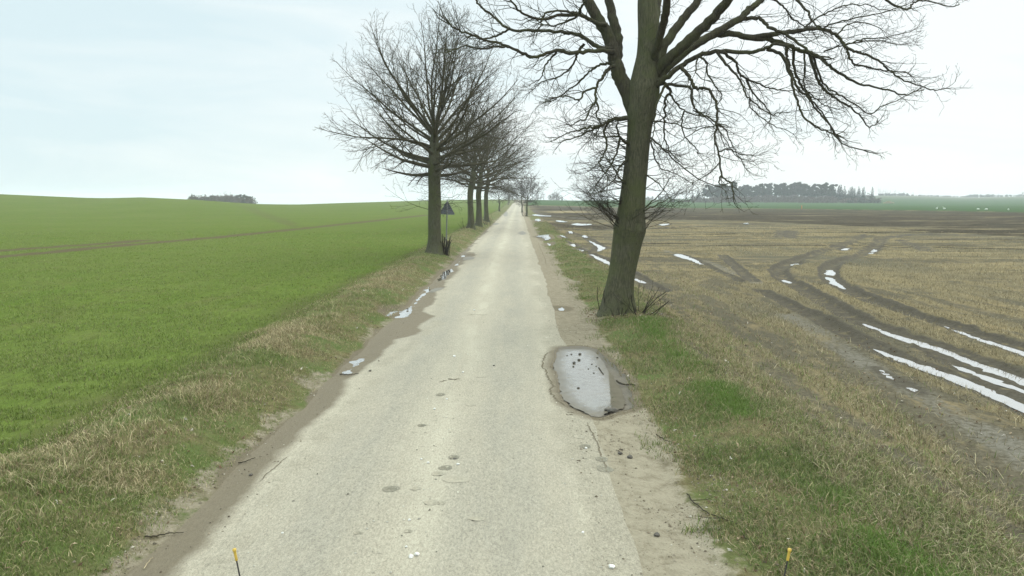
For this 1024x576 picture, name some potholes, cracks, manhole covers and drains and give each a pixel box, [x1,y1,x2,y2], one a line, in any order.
pothole [551,346,634,418]
